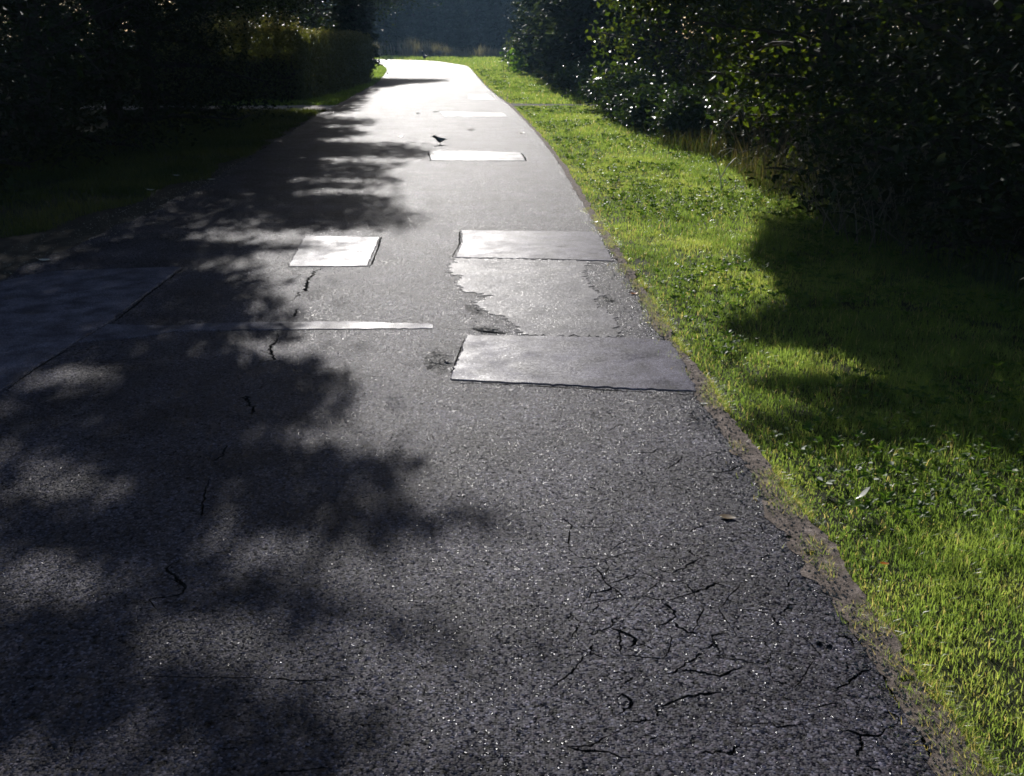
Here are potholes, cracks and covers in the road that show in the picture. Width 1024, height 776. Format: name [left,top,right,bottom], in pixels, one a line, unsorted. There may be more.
crack [553,515,900,772]
crack [241,396,255,415]
pothole [469,326,511,335]
crack [200,480,209,518]
pothole [423,351,454,376]
crack [258,269,321,362]
